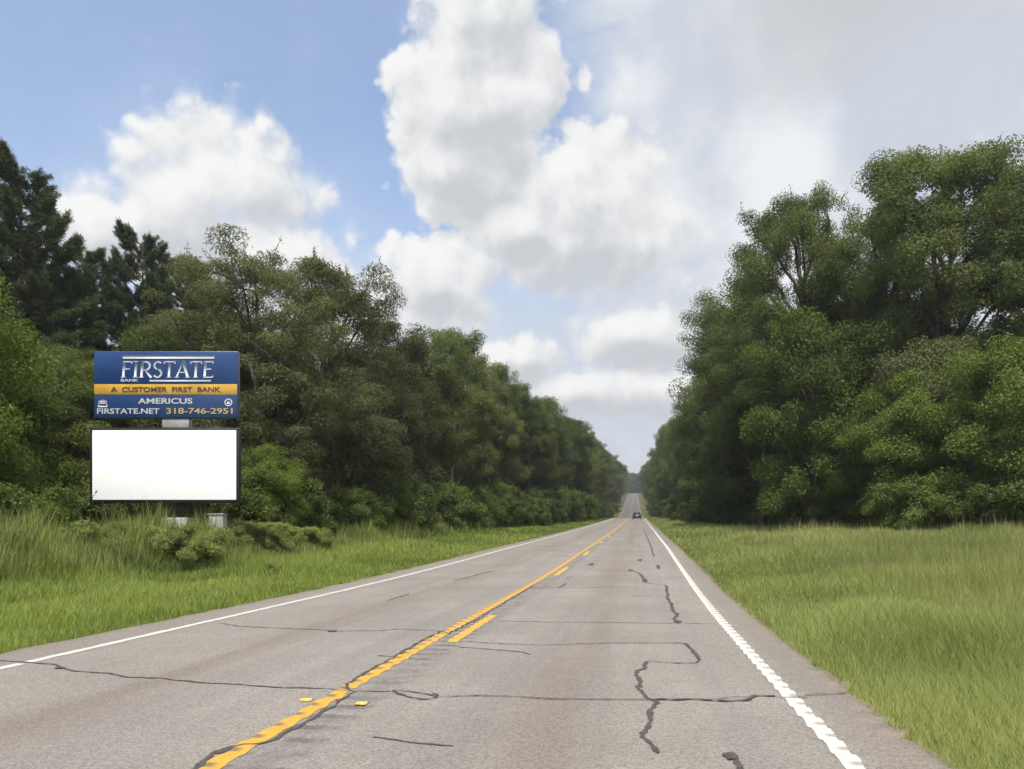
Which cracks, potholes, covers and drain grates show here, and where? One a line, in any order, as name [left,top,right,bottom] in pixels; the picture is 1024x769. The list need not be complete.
crack [223,623,435,632]
crack [372,736,454,746]
